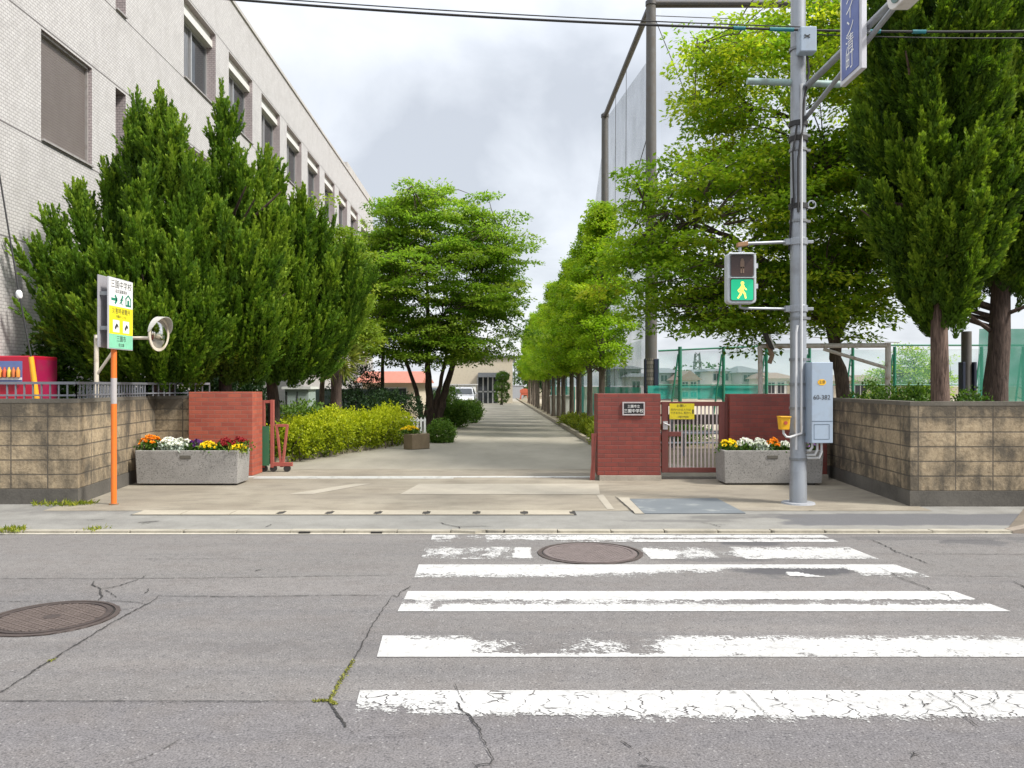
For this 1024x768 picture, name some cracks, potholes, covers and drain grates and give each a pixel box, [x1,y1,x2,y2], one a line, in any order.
crack [454,682,494,768]
crack [873,540,951,598]
manhole cover [0,600,121,637]
crack [2,576,410,737]
manhole cover [537,542,643,564]
